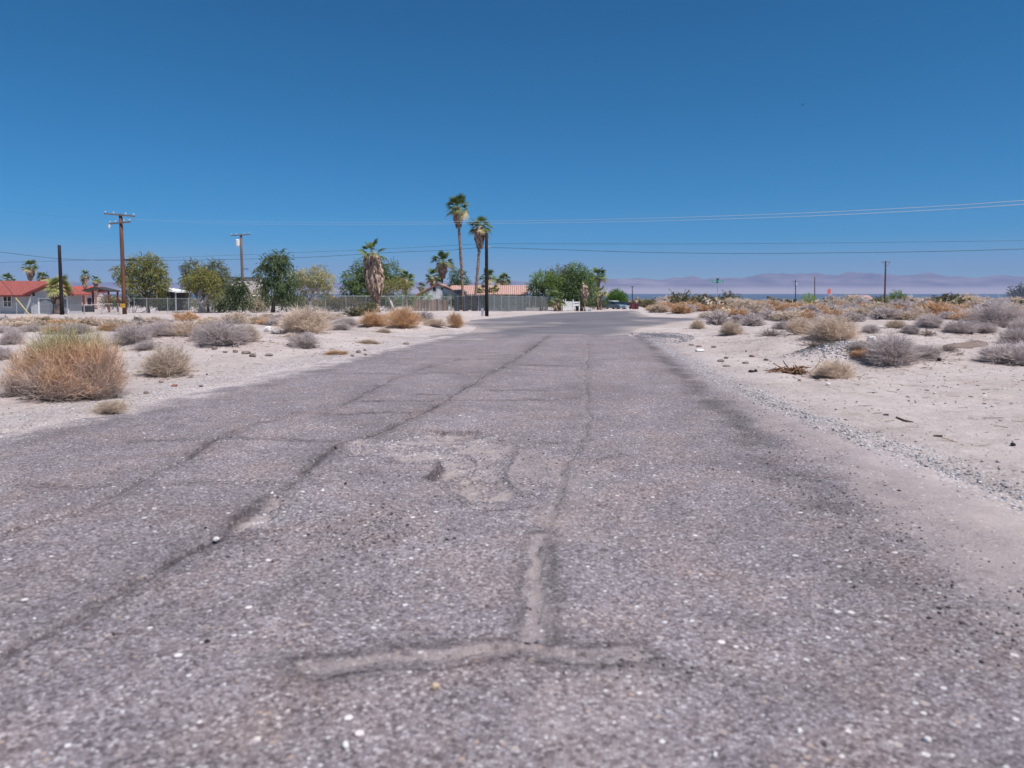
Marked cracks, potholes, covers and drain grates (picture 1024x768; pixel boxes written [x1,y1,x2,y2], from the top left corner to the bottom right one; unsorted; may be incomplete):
crack [0,352,581,541]
crack [537,439,627,462]
crack [303,535,638,681]
